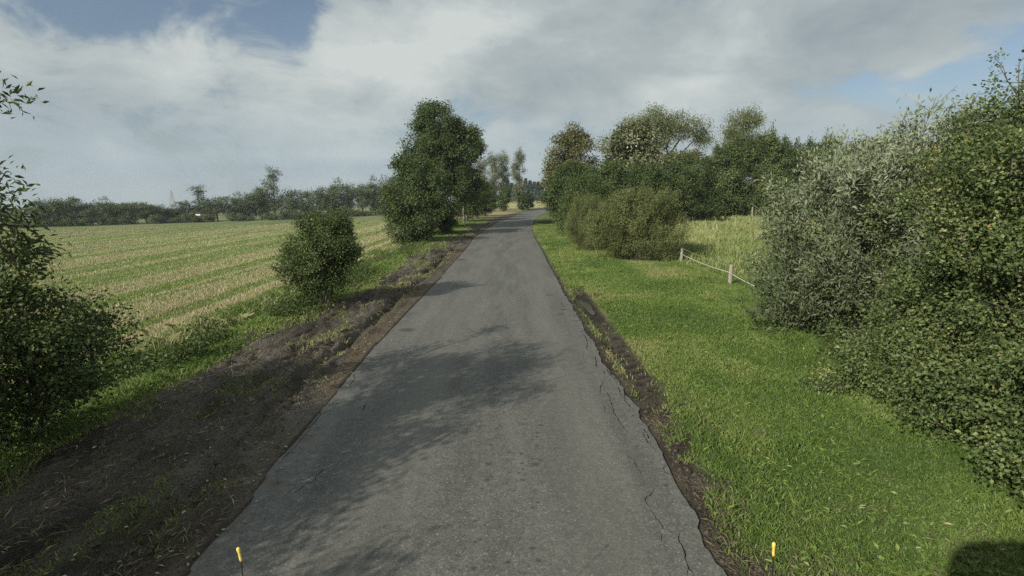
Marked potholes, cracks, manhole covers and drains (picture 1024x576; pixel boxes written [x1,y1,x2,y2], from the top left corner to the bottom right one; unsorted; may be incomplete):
crack [581,330,669,474]
crack [645,494,691,576]
